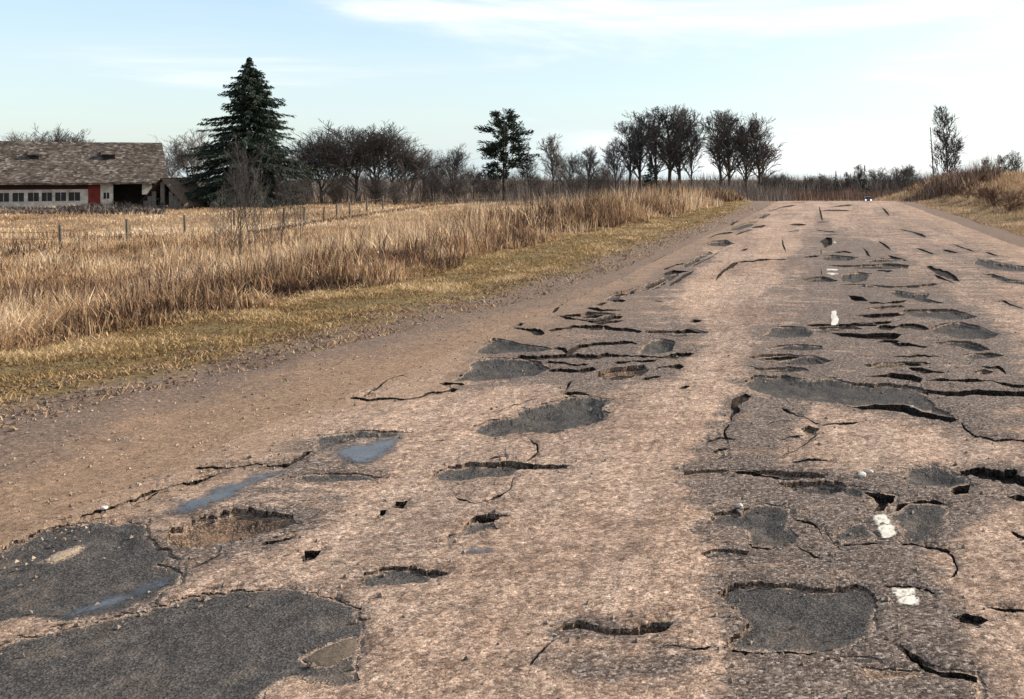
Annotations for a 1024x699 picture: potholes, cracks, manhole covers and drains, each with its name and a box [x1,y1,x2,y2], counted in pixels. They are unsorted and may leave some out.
pothole [447,513,508,541]
crack [851,300,1024,389]
crack [495,204,851,414]
crack [530,643,551,665]
crack [793,519,958,594]
pothole [163,507,299,550]
crack [435,438,539,504]
crack [835,209,997,283]
crack [80,451,311,518]
pothole [311,430,408,450]
crack [340,374,464,401]
